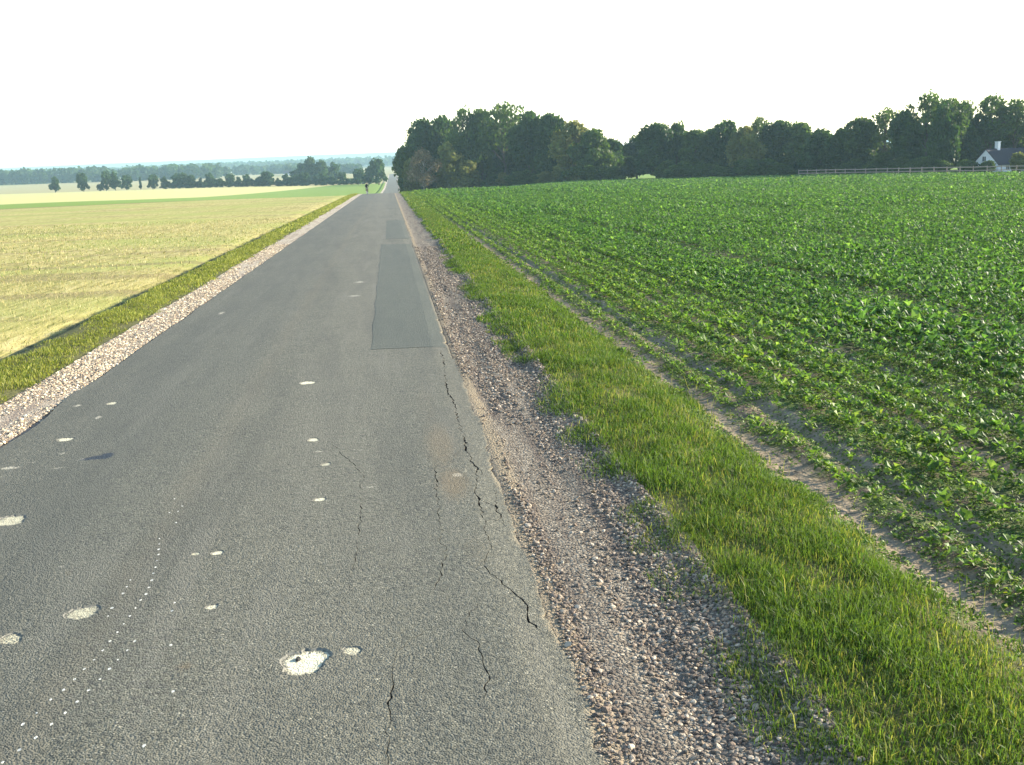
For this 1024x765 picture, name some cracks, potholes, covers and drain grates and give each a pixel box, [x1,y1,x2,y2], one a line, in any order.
crack [434,464,447,589]
crack [331,442,364,616]
pothole [63,604,101,620]
crack [462,598,491,699]
crack [440,351,547,634]
pothole [279,648,333,676]
